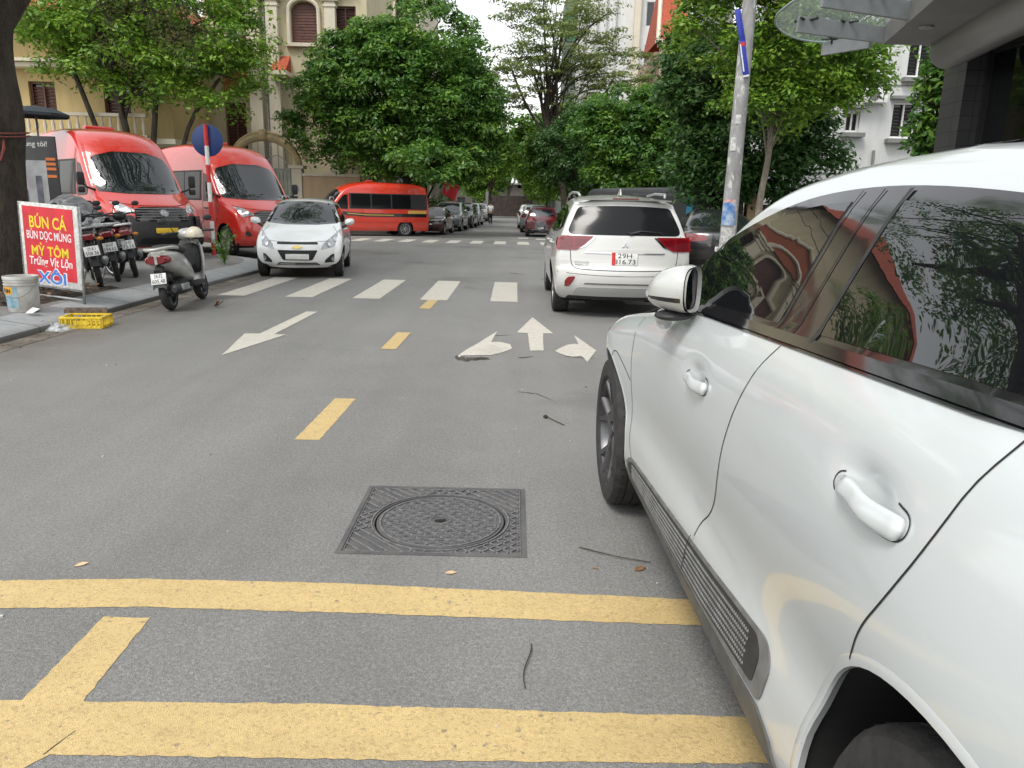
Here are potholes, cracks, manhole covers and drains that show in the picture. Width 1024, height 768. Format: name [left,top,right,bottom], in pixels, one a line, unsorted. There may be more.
manhole cover [335,485,527,558]
